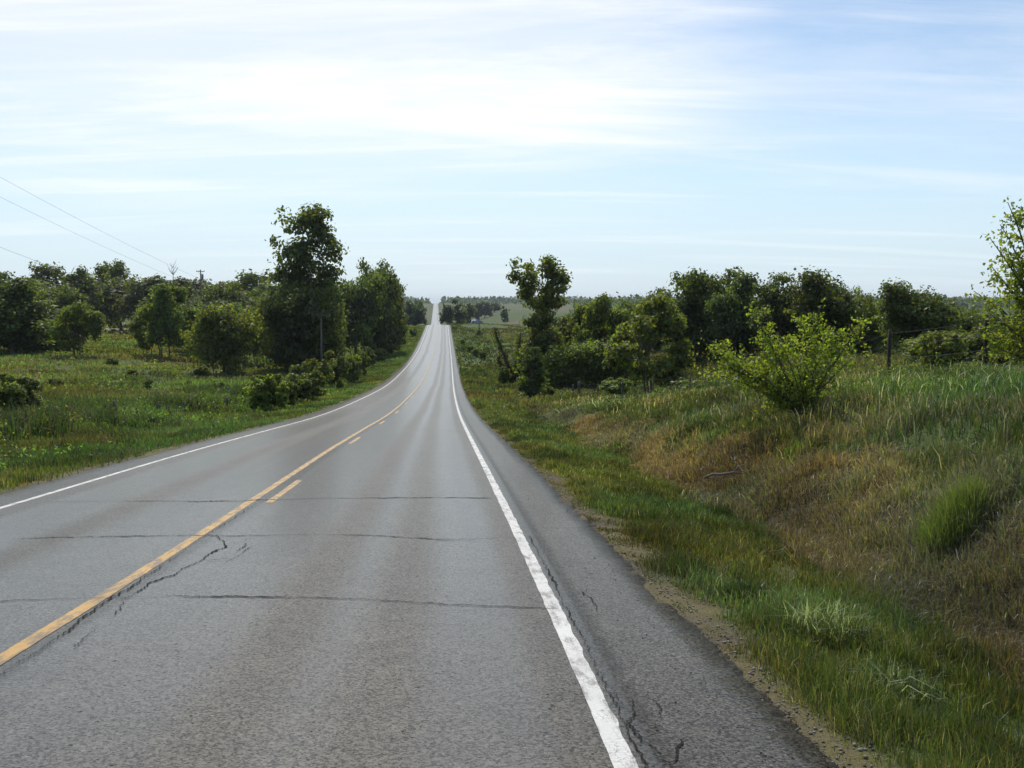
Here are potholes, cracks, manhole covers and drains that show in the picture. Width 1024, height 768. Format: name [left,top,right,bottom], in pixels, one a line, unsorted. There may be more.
crack [0,505,540,675]
crack [531,538,686,768]
